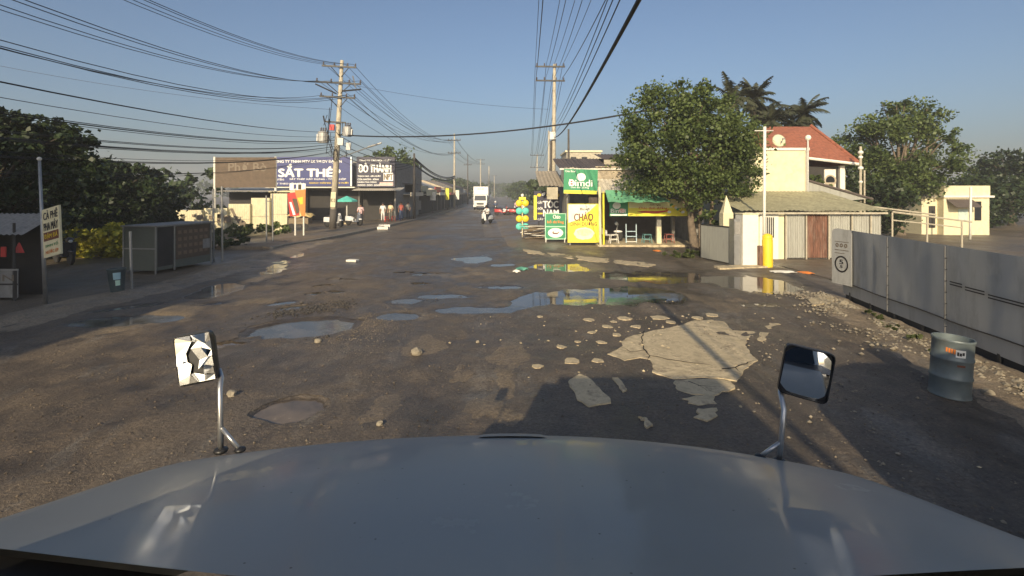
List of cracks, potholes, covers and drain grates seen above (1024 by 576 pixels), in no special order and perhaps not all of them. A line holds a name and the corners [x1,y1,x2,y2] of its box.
pothole [230,316,365,343]
crack [625,331,703,364]
pothole [247,394,331,425]
